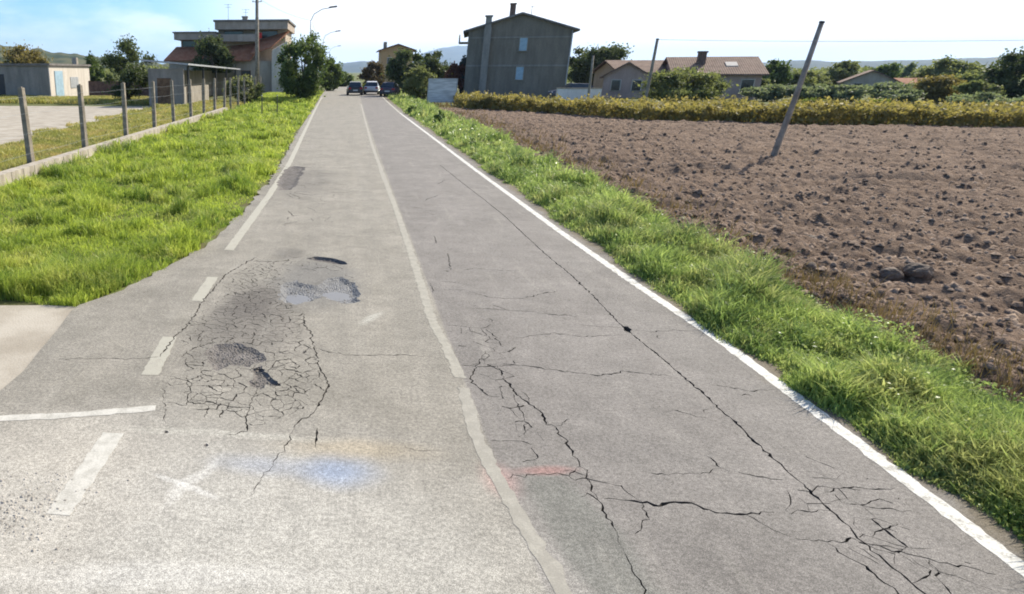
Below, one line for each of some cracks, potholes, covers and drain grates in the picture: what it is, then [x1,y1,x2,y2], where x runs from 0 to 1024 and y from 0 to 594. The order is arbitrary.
pothole [204,343,267,371]
crack [54,256,430,495]
pothole [277,277,361,305]
crack [414,167,996,594]
pothole [307,257,347,265]
pothole [248,365,281,390]
